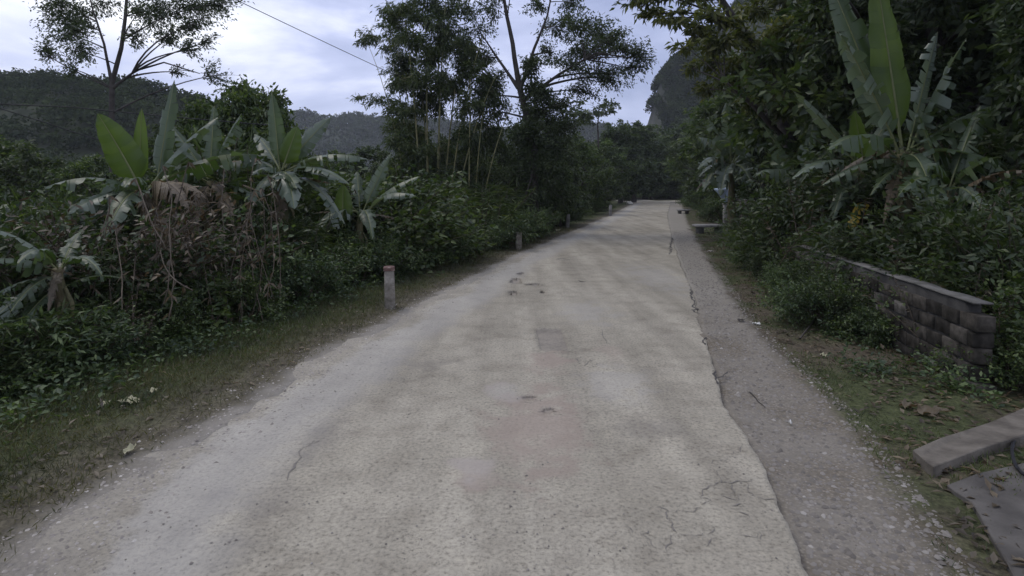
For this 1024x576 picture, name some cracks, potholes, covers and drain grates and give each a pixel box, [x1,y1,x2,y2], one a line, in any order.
crack [625,447,775,551]
pothole [515,393,544,402]
pothole [534,404,564,417]
